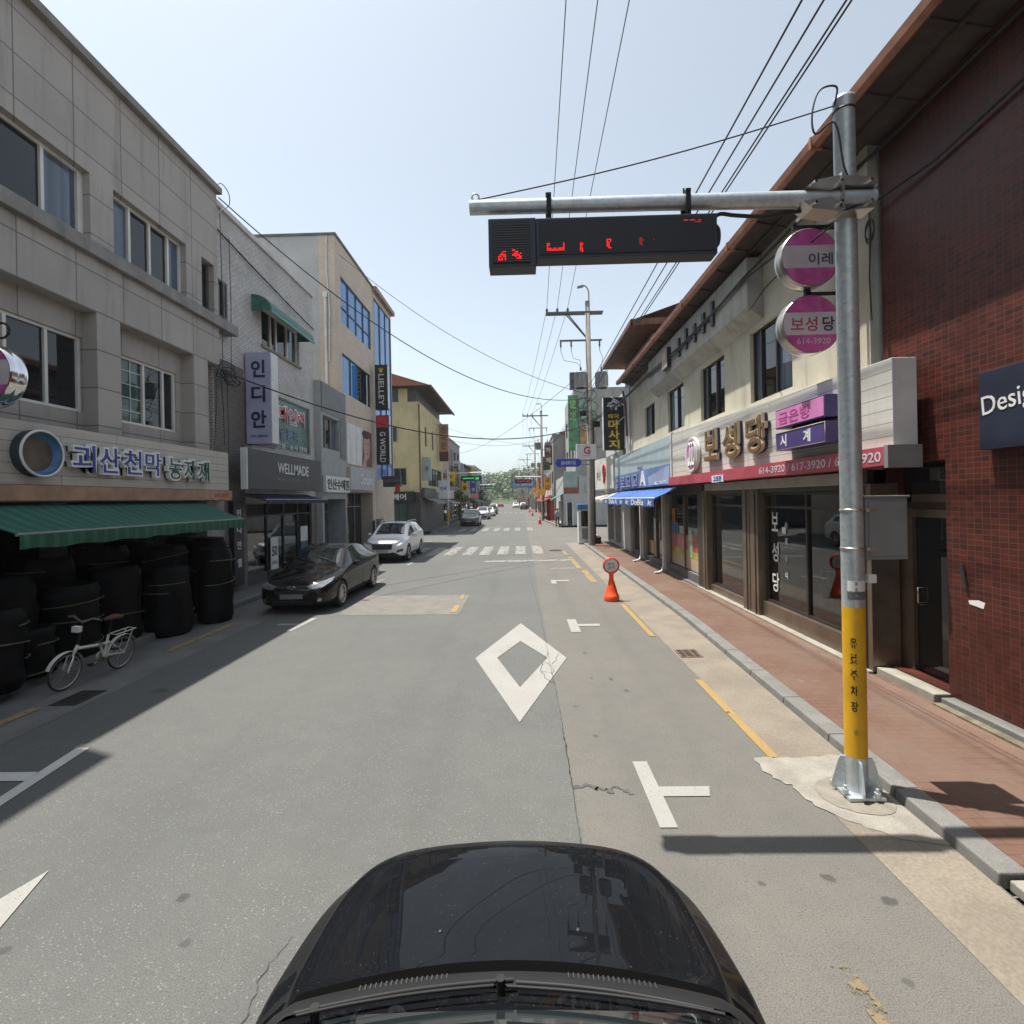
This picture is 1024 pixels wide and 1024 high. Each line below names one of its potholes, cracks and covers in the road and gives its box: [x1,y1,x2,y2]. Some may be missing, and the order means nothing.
crack [240,940,289,1024]
drain grate [49,690,107,706]
drain grate [673,649,703,658]
crack [530,575,633,844]
